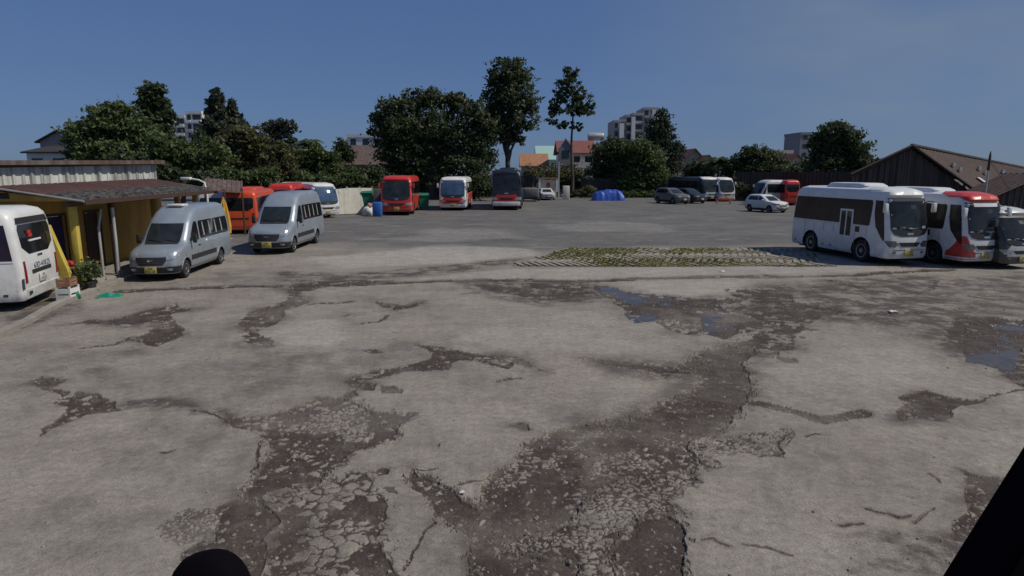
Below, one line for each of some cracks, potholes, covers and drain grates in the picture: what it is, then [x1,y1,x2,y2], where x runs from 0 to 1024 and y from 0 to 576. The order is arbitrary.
crack [476,360,522,382]
crack [189,409,227,422]
crack [457,399,876,576]
pothole [942,316,1024,387]
pothole [560,283,775,340]
crack [249,440,440,576]
crack [155,507,223,546]
crack [838,507,936,528]
